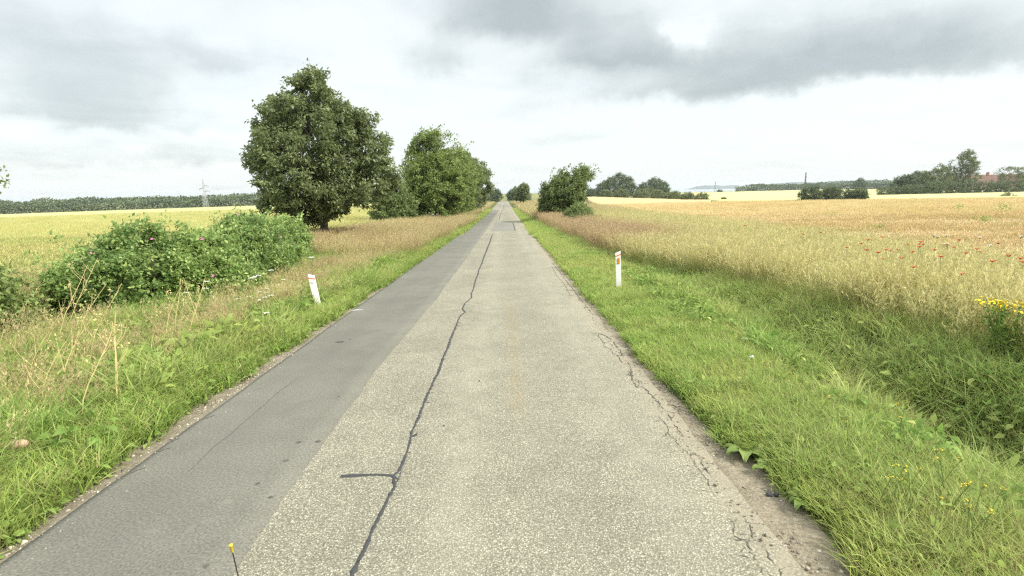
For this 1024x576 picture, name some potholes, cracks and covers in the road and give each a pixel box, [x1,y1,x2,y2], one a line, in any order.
crack [594,333,712,491]
crack [726,498,789,576]
